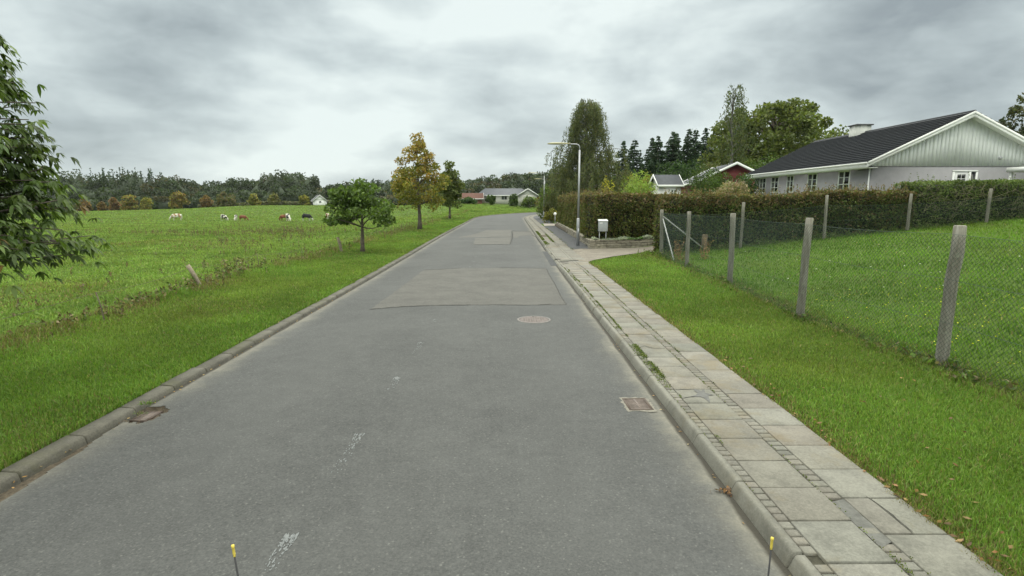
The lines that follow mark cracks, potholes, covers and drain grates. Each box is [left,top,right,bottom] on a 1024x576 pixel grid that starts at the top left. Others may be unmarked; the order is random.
drain grate [619,397,658,412]
